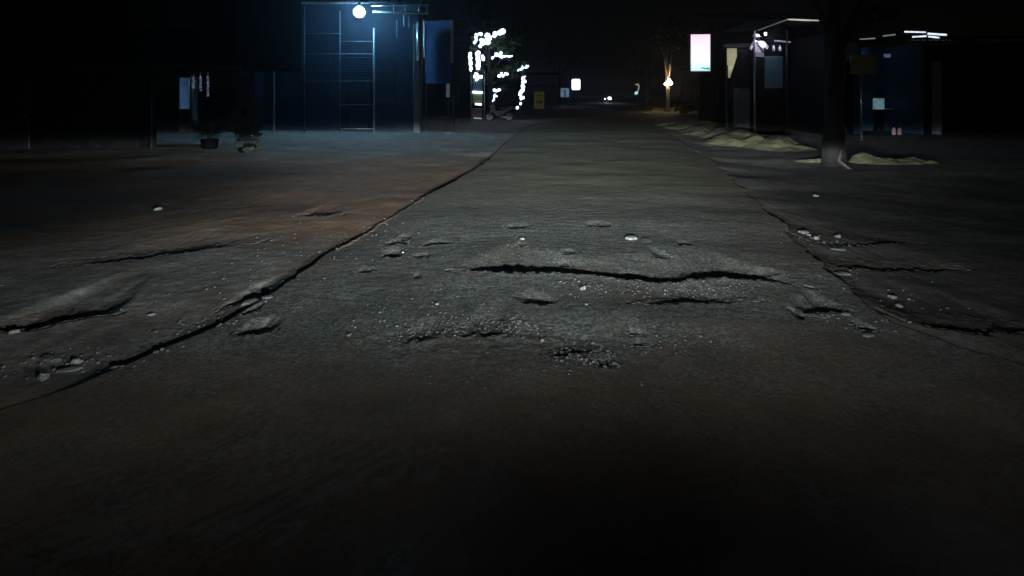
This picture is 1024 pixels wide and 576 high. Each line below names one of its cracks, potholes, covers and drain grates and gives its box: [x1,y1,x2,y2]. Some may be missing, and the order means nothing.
pothole [229,326,279,337]
crack [354,238,814,289]
pothole [541,345,603,358]
